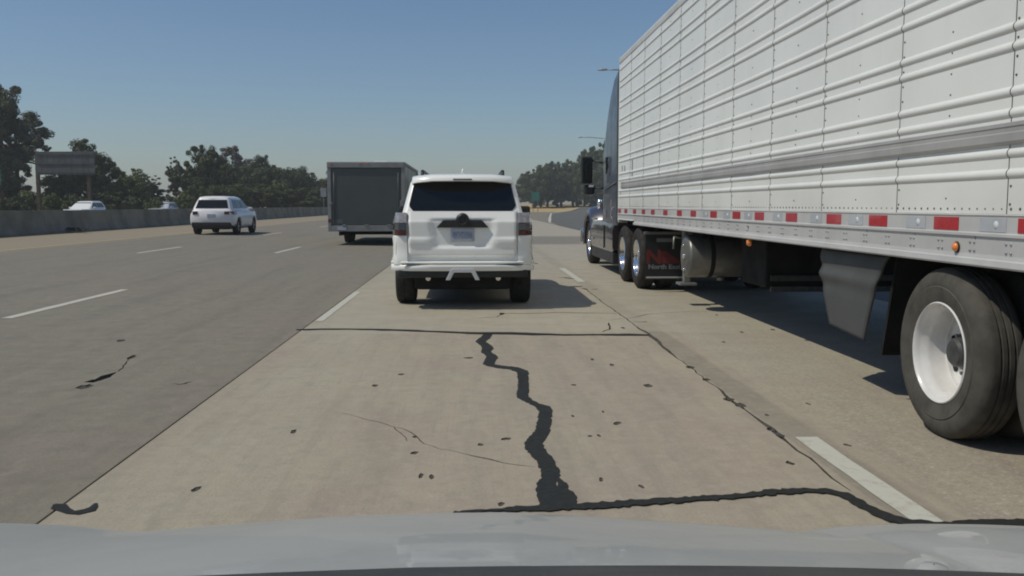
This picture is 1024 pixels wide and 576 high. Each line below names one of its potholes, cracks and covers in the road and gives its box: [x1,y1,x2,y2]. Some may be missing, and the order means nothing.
crack [344,413,534,467]
crack [485,277,851,491]
